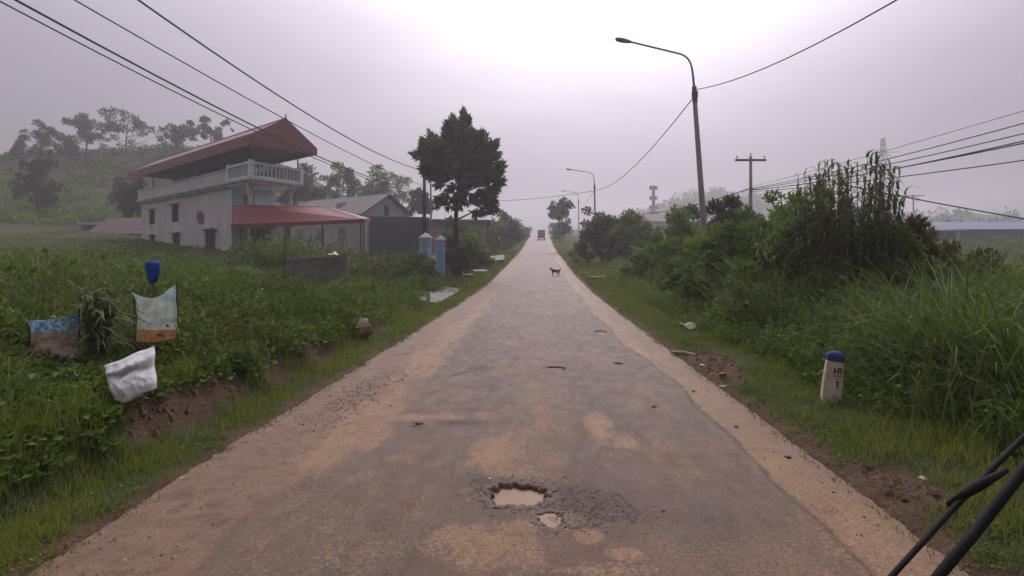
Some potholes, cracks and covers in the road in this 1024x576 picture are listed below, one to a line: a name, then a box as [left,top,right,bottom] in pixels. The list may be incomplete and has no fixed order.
pothole [529,508,572,533]
pothole [474,479,564,510]
